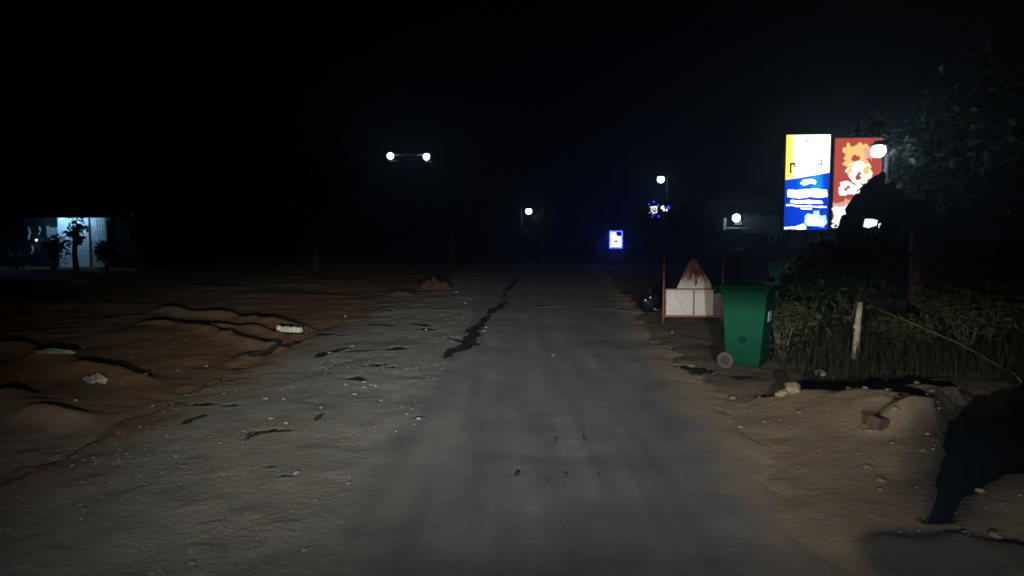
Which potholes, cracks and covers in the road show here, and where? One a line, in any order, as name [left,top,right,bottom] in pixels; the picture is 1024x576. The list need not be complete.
pothole [674,365,714,374]
crack [412,279,519,358]
